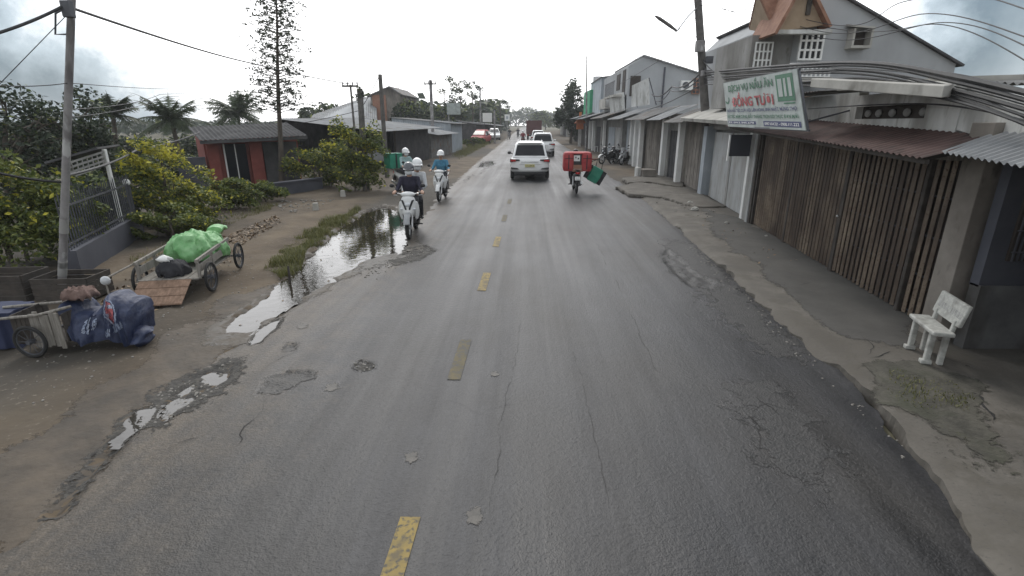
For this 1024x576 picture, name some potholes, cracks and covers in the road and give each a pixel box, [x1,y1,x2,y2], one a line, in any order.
crack [574,355,609,505]
pothole [349,359,375,372]
crack [742,393,813,453]
pothole [105,406,159,450]
pothole [132,354,249,434]
